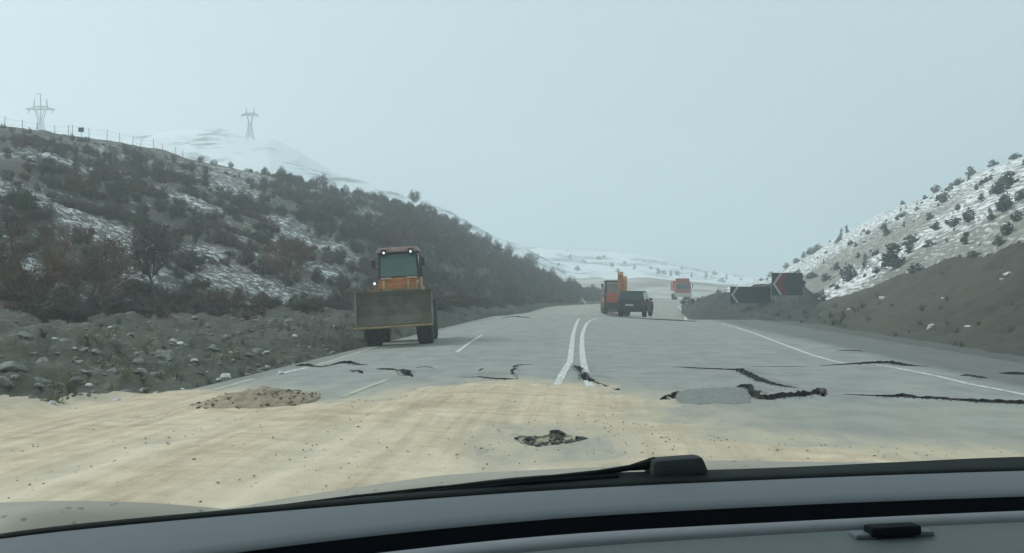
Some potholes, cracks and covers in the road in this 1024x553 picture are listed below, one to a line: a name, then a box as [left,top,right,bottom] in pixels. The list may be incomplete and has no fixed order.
crack [478,364,528,381]
crack [569,365,607,387]
crack [845,372,1024,405]
crack [823,350,918,366]
crack [296,360,435,377]
crack [682,367,820,402]
pothole [514,429,588,447]
